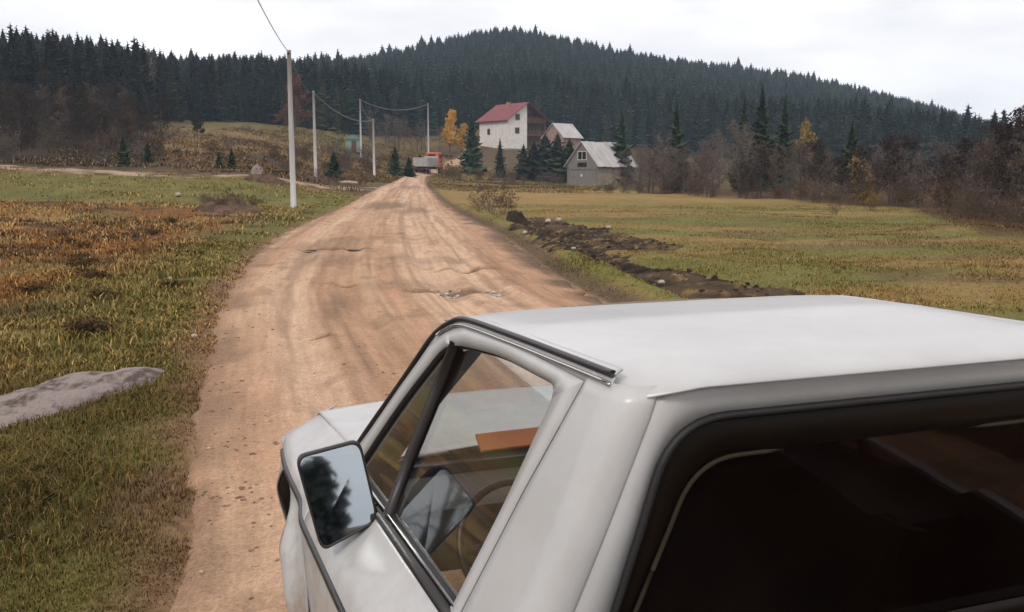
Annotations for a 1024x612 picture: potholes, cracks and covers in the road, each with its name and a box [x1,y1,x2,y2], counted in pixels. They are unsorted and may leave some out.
pothole [285,246,391,254]
pothole [386,285,522,300]
